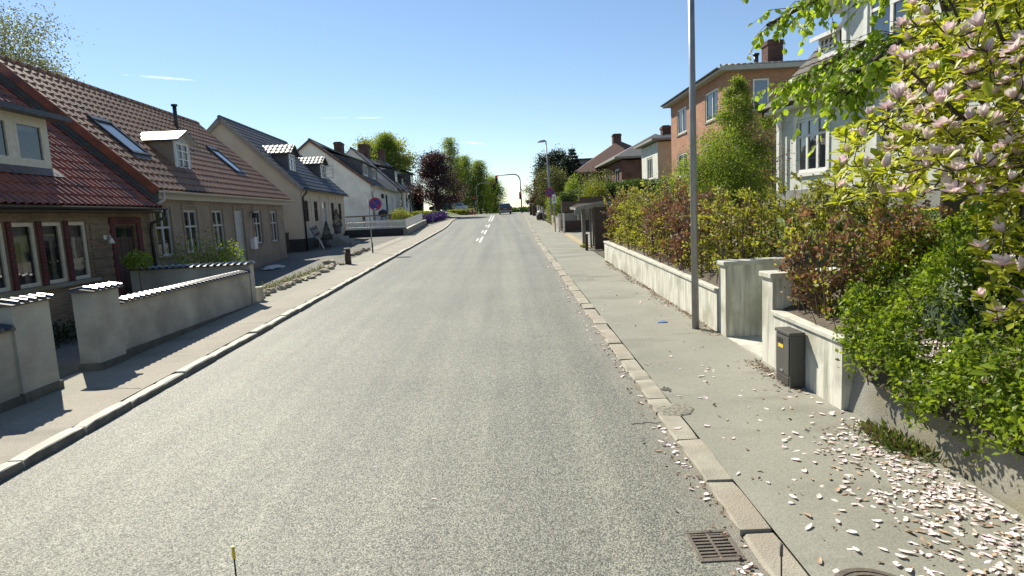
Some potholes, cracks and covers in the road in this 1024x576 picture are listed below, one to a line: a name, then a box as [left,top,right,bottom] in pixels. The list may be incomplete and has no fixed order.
manhole cover [834,568,896,576]
drain grate [684,529,747,563]
